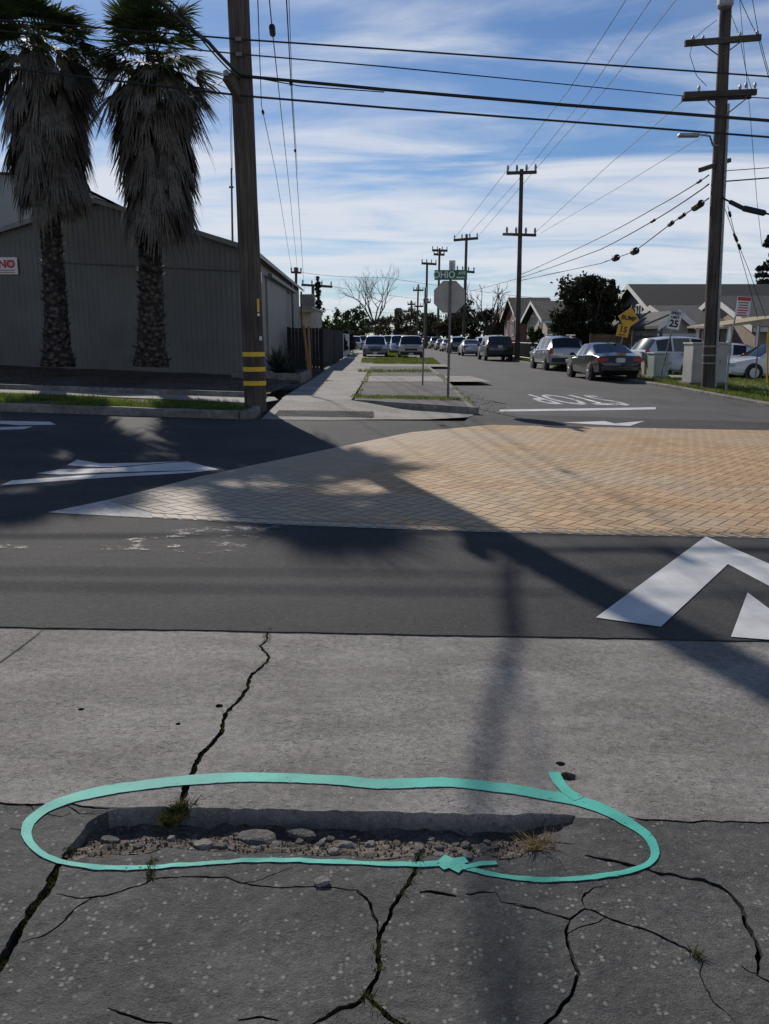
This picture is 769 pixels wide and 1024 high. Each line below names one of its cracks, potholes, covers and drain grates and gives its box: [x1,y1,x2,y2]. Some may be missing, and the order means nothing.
pothole [61,806,575,861]
crack [174,627,274,809]
crack [0,845,769,1024]
